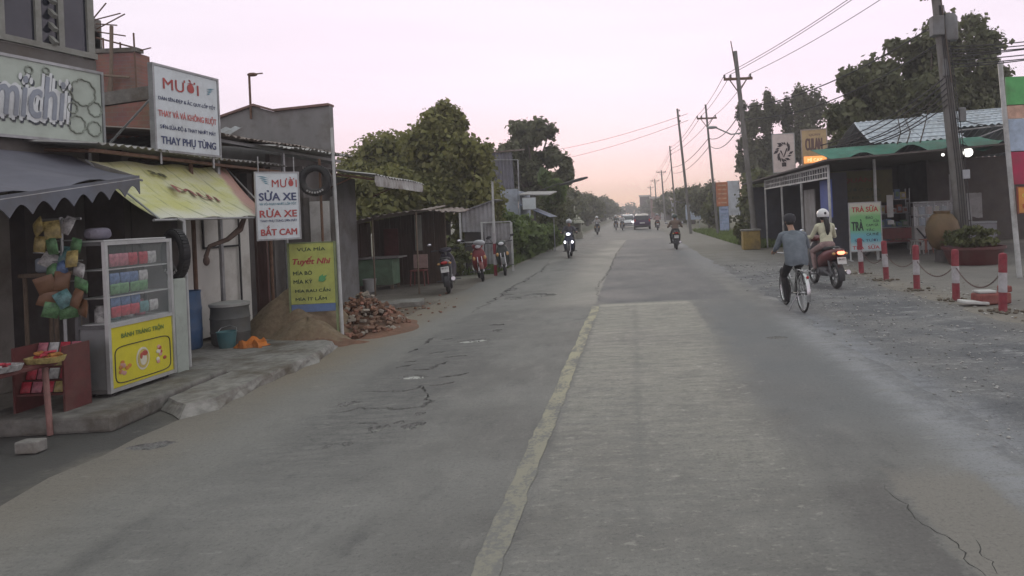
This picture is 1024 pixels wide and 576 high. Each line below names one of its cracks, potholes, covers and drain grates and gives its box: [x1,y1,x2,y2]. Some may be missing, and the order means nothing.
crack [884,485,997,576]
crack [470,263,550,325]
crack [338,337,469,424]
